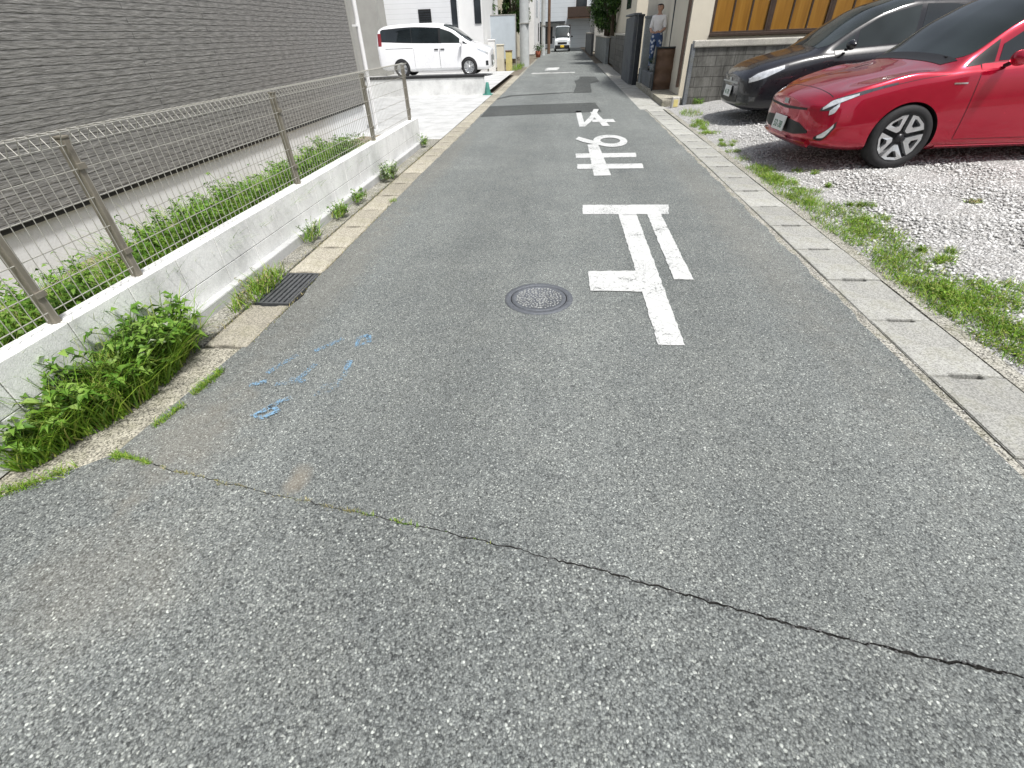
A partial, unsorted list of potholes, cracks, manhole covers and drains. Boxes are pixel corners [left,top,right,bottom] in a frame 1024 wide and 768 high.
crack [124,457,1024,680]
manhole cover [505,283,573,315]
drain grate [254,273,321,307]
